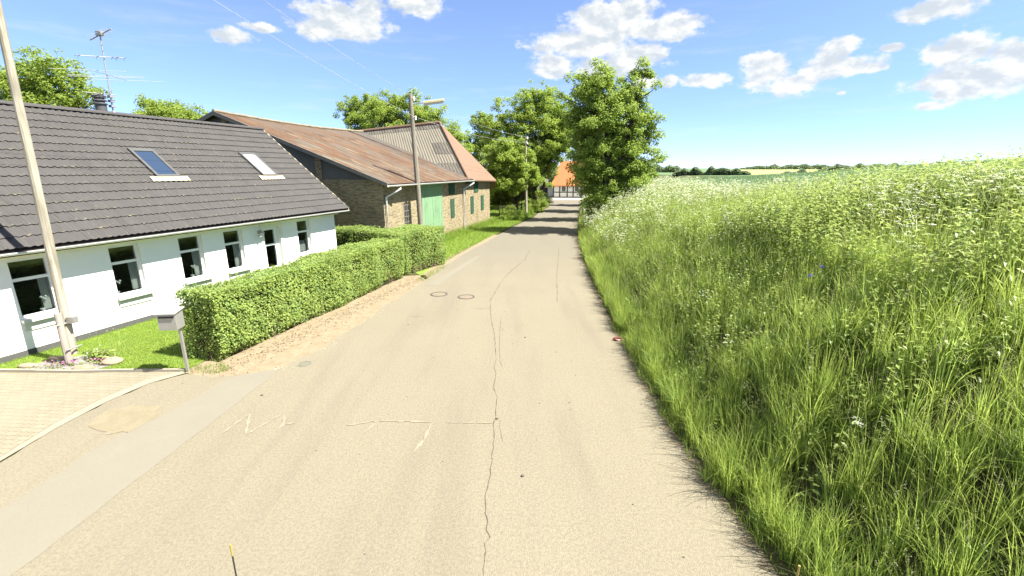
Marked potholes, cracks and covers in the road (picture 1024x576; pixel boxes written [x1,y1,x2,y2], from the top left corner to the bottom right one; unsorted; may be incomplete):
crack [476,250,530,576]
